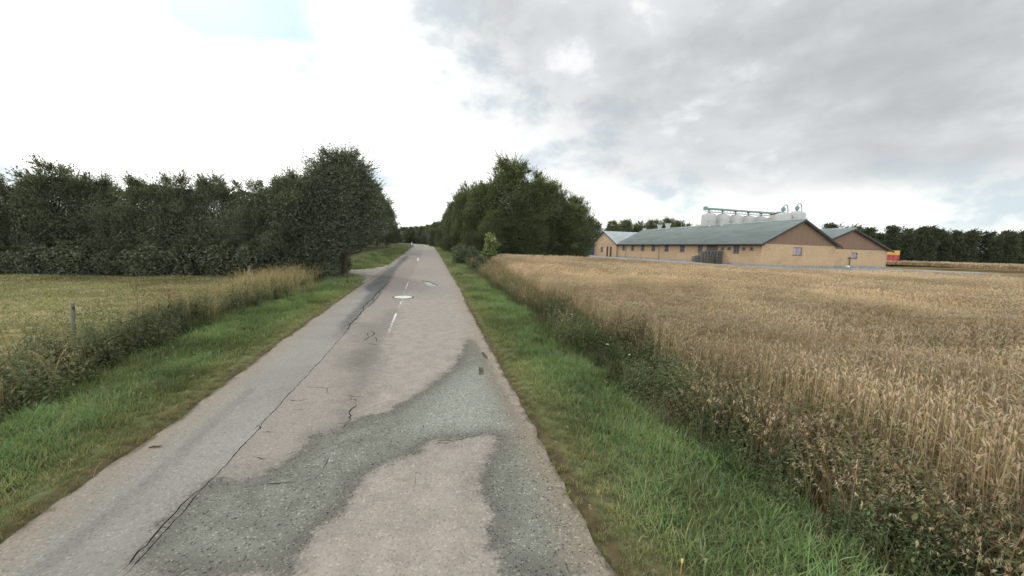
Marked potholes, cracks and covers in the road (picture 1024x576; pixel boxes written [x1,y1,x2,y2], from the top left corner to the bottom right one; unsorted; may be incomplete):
crack [347,282,389,345]
